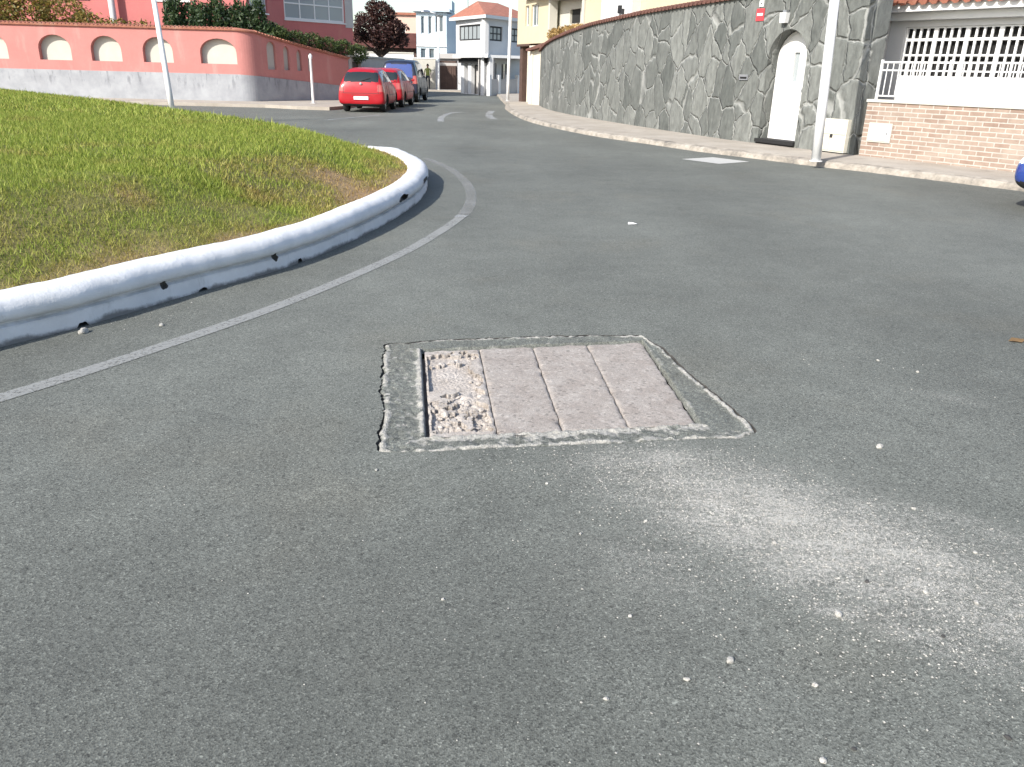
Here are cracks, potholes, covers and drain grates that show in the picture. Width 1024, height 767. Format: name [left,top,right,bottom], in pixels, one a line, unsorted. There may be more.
manhole cover [378,335,755,453]
pothole [427,354,491,434]
